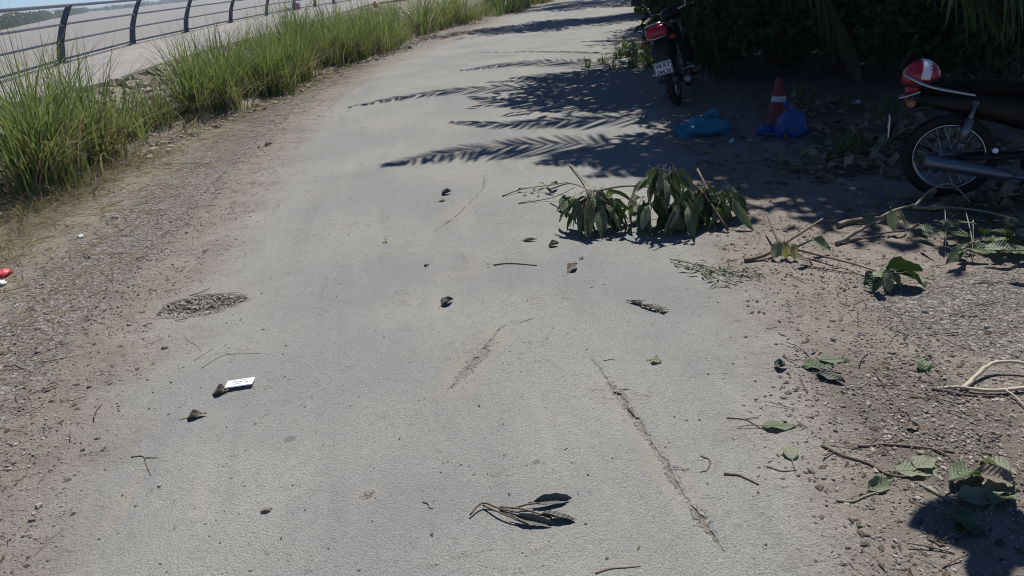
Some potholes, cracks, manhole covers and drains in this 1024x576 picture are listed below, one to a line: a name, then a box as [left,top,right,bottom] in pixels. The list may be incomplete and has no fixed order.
pothole [150,292,255,320]
crack [447,319,530,391]
crack [590,358,724,551]
crack [435,170,487,231]
